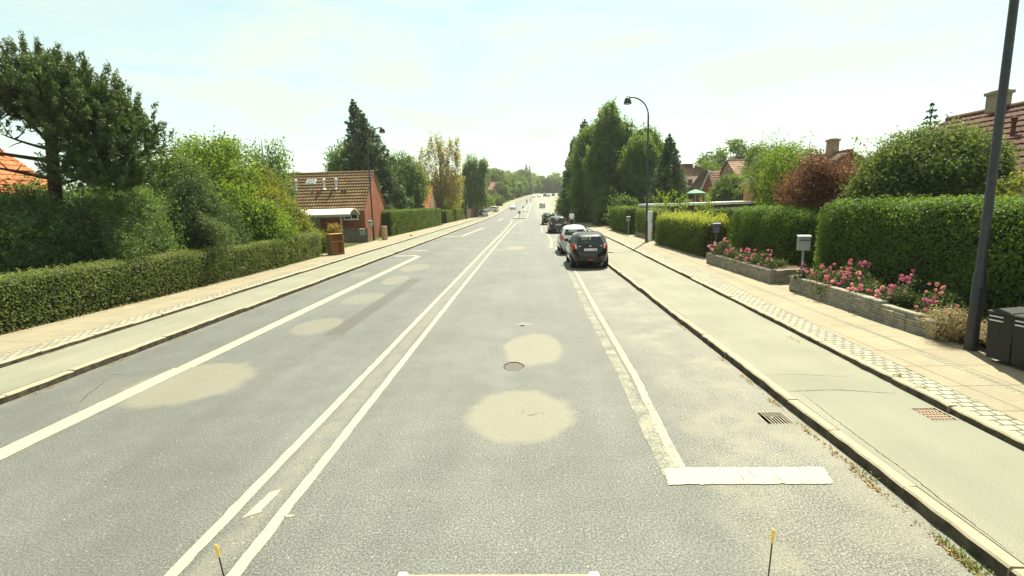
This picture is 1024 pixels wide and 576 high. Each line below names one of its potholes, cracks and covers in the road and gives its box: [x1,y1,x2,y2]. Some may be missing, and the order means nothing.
manhole cover [503,362,524,371]
drain grate [910,408,958,421]
drain grate [755,412,795,425]
